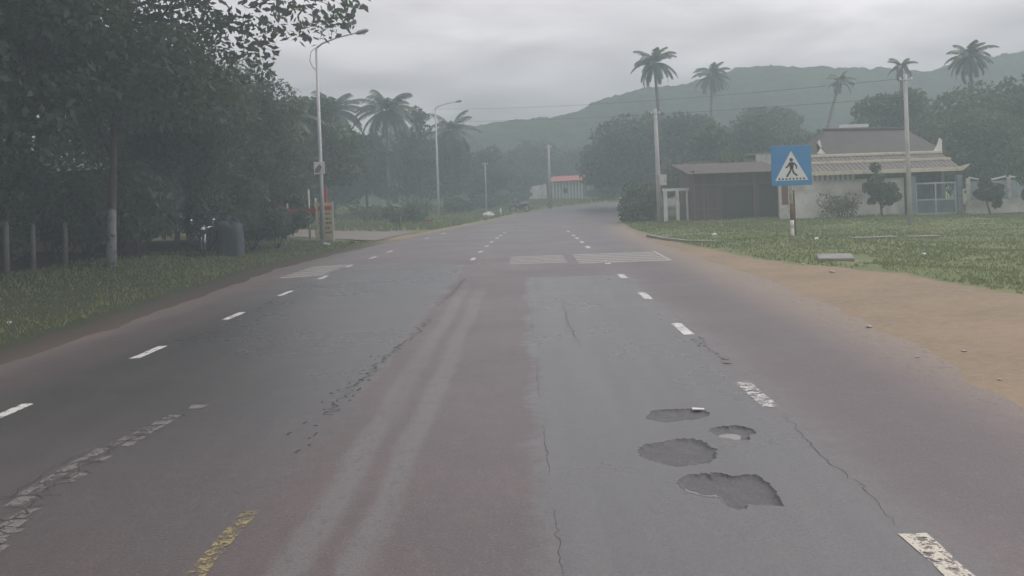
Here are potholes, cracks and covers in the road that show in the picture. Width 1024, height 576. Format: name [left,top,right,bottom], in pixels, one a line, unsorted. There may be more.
crack [532,308,581,576]
pothole [709,425,756,440]
pothole [645,407,710,423]
crack [691,336,898,527]
pothole [677,472,784,510]
pothole [637,438,718,467]
